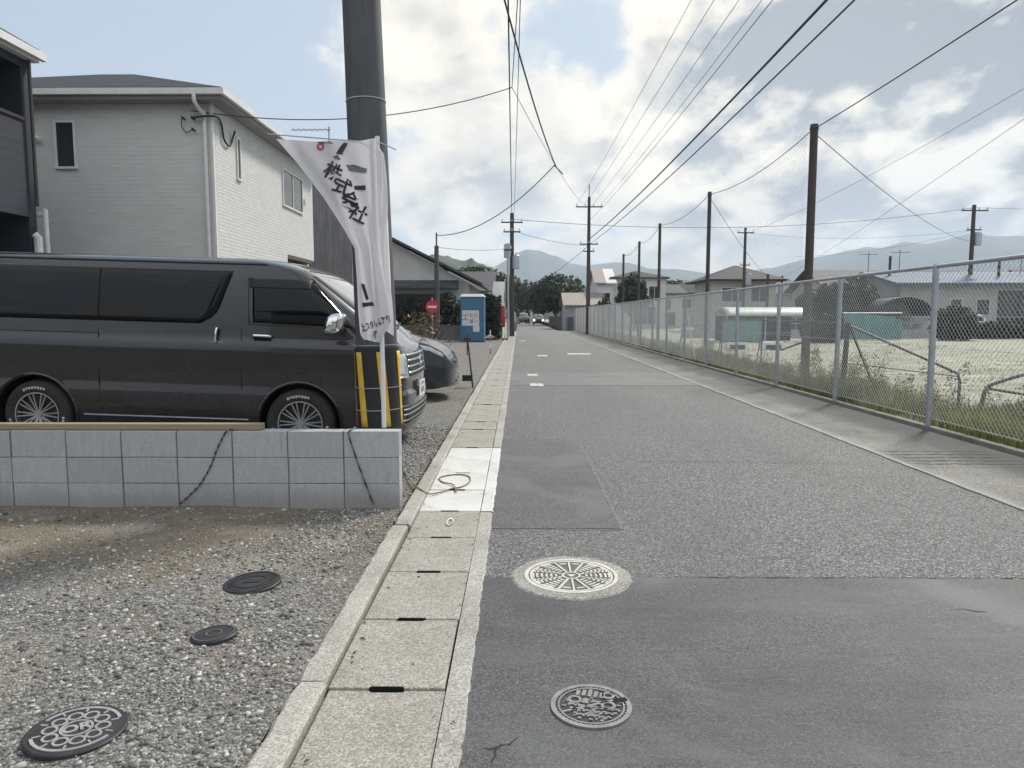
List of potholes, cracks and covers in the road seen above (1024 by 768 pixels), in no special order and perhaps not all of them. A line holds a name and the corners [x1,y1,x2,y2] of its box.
manhole cover [510,556,633,601]
crack [485,736,520,761]
manhole cover [21,705,129,761]
manhole cover [222,571,282,595]
manhole cover [551,684,632,730]
manhole cover [190,624,238,646]
